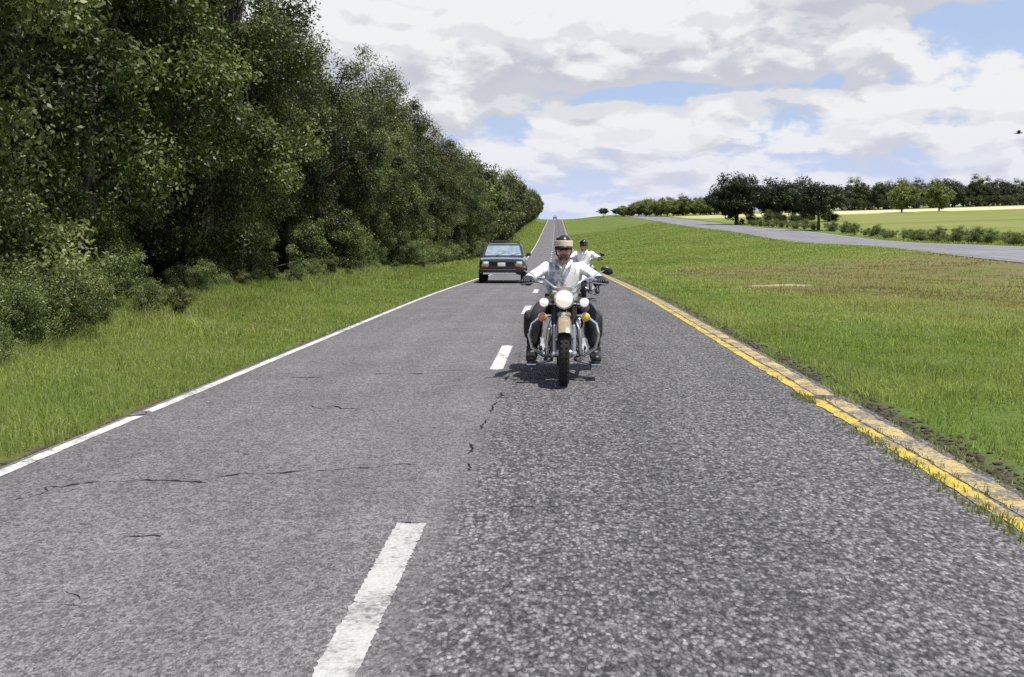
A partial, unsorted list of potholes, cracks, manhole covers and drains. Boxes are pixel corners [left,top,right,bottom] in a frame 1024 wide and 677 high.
crack [297,370,478,378]
crack [13,453,414,500]
